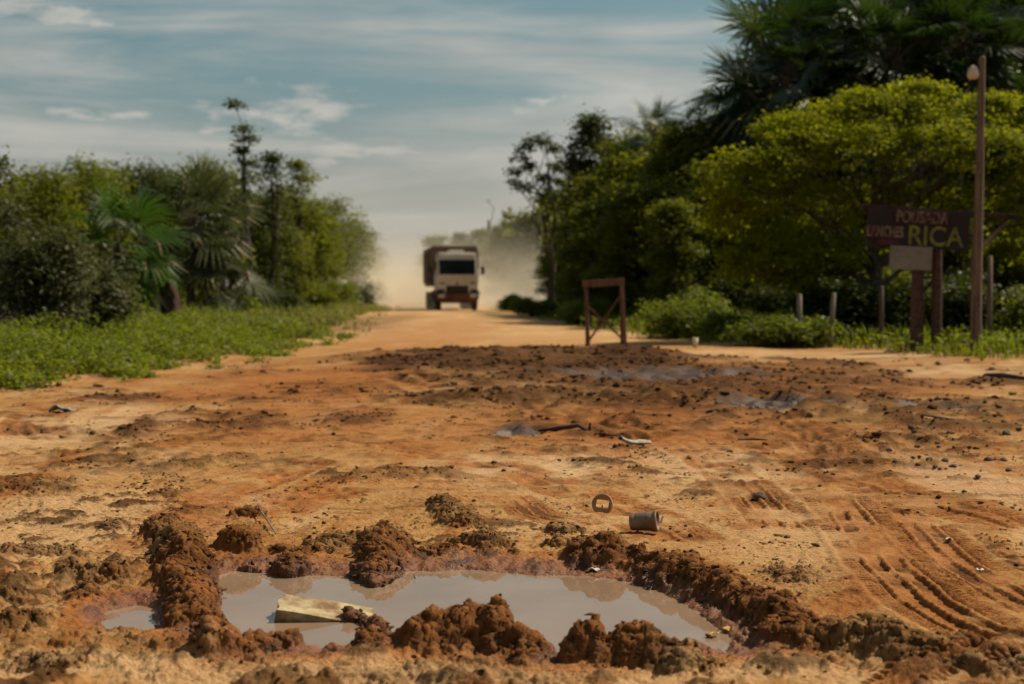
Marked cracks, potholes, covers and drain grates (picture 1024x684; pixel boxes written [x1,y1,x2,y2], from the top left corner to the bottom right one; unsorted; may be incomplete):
pothole [522,362,759,381]
pothole [703,388,861,411]
pothole [115,539,831,680]
